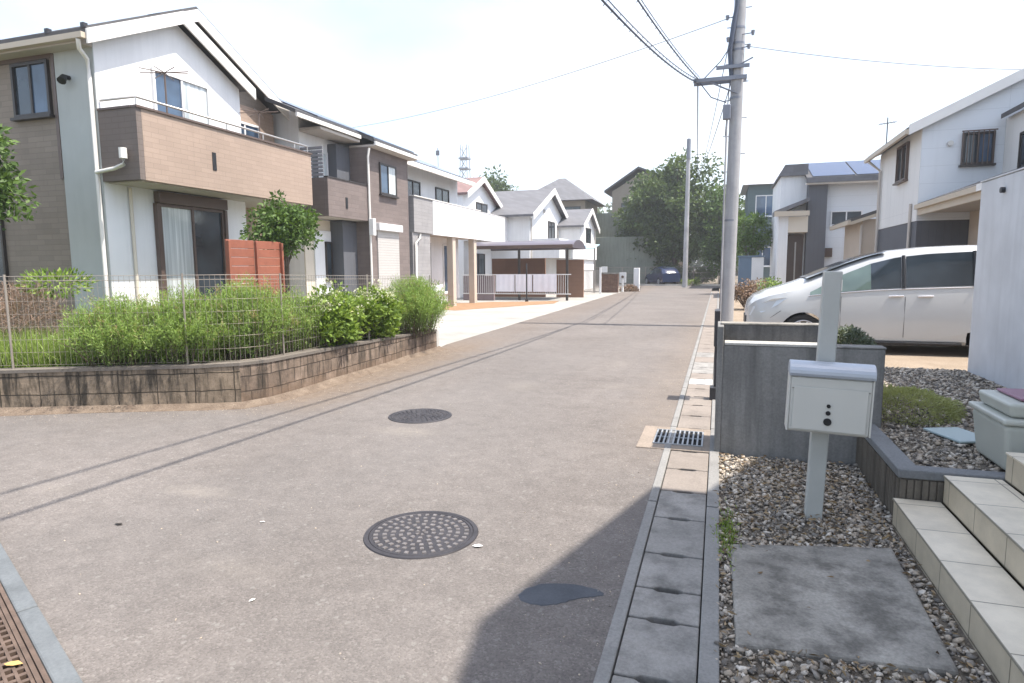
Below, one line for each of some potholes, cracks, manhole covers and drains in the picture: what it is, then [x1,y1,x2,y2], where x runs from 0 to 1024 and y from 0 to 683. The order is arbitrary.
manhole cover [388,408,452,424]
drain grate [636,426,711,465]
manhole cover [363,511,479,559]
drain grate [0,583,52,683]
